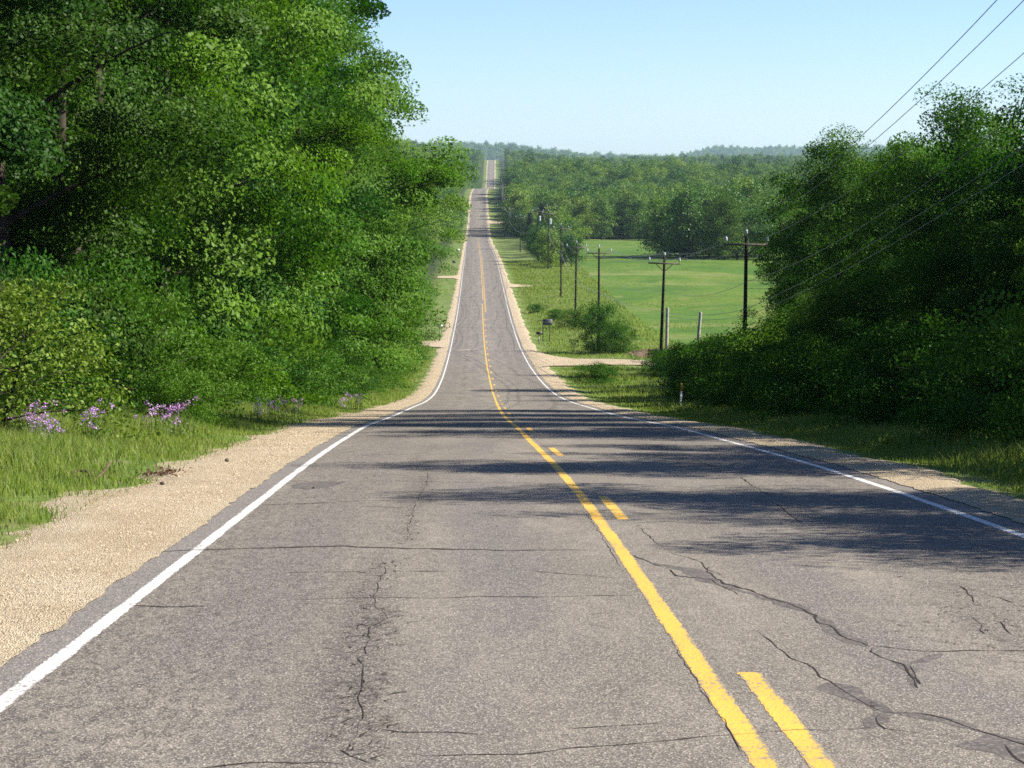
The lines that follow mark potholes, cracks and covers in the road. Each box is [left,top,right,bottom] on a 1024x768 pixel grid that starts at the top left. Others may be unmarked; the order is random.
crack [163,473,1024,768]
